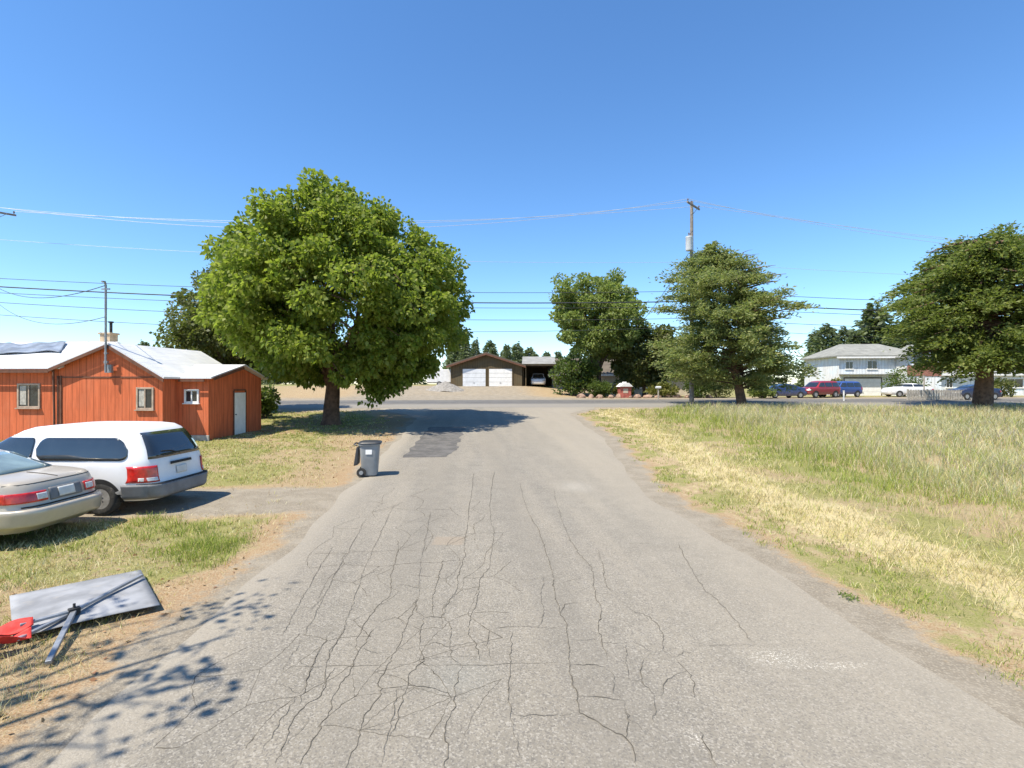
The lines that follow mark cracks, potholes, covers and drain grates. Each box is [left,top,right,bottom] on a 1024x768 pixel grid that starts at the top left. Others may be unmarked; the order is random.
crack [153,474,755,768]
